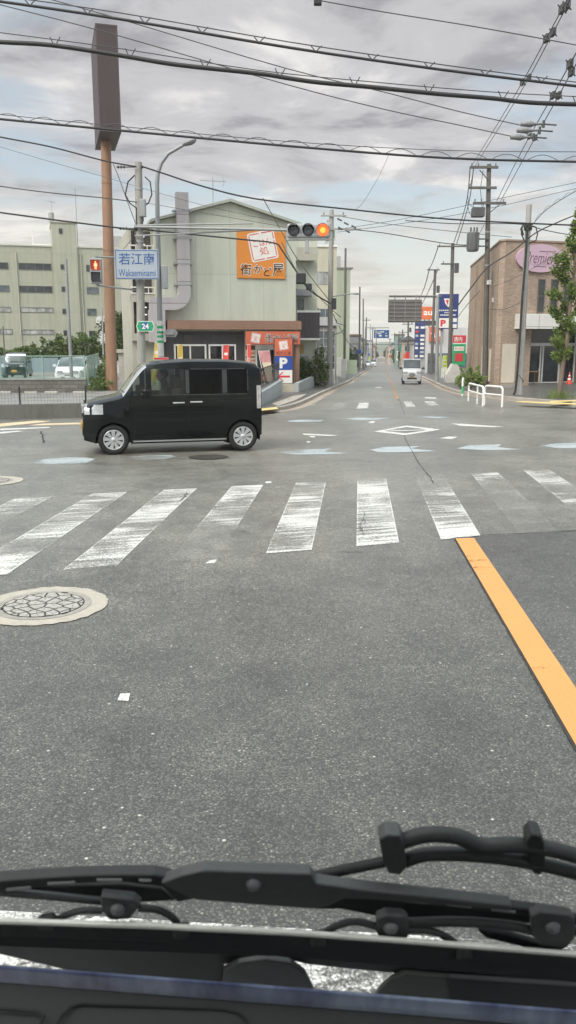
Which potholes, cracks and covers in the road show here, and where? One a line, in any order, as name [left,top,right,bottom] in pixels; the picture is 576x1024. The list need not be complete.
manhole cover [0,476,24,485]
manhole cover [0,586,108,626]
